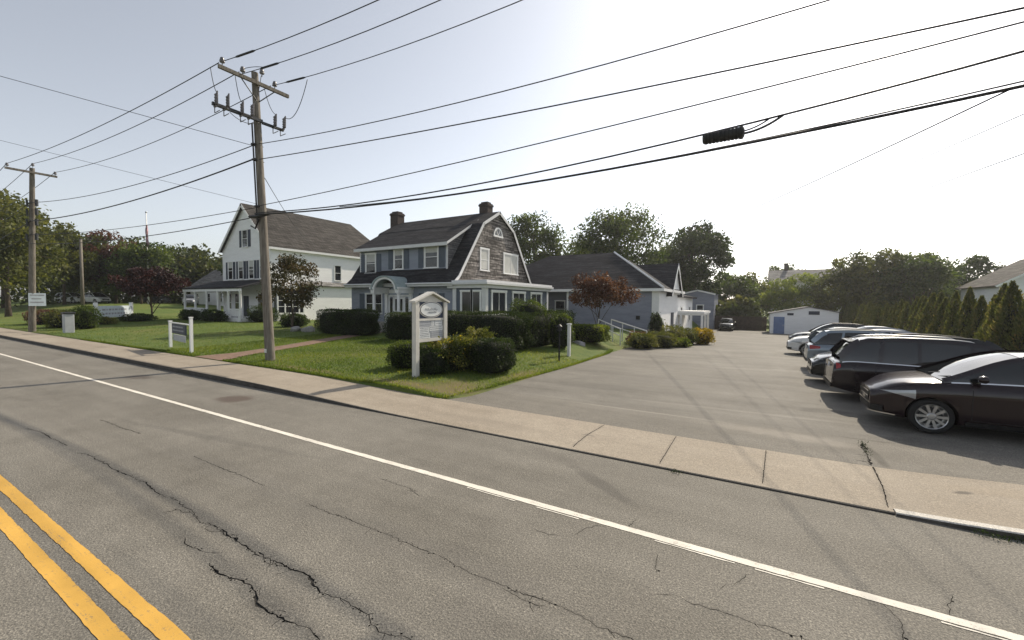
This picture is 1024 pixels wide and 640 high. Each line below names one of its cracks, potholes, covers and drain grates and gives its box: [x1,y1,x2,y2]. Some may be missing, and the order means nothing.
crack [30,429,413,640]
crack [660,594,806,640]
crack [856,443,889,508]
